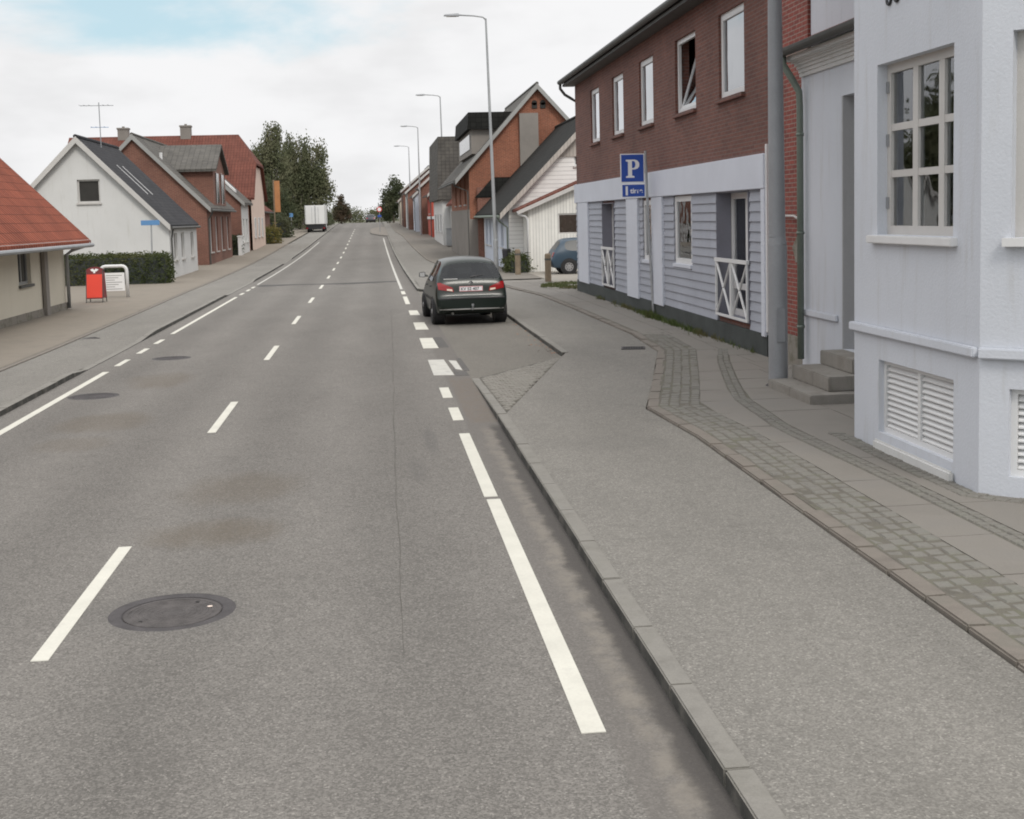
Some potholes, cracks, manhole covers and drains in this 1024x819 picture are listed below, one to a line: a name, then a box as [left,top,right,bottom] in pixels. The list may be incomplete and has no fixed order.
manhole cover [108,593,236,632]
